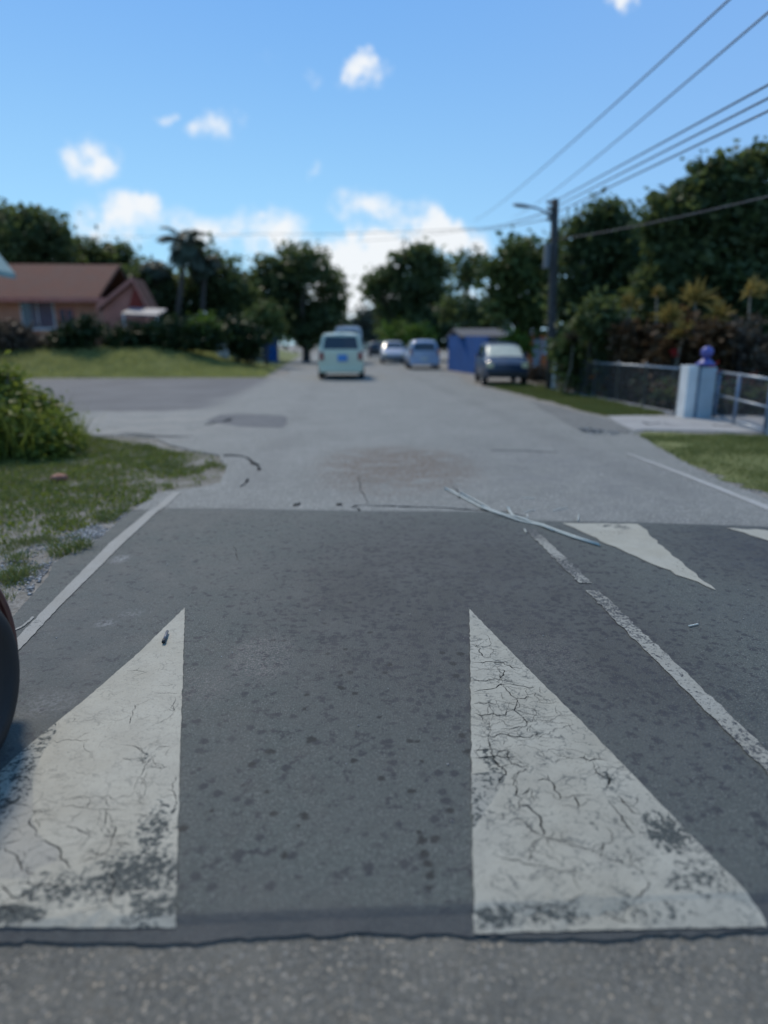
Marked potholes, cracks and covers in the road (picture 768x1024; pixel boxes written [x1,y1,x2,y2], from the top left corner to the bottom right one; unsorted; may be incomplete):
crack [2,698,177,913]
crack [482,640,649,918]
